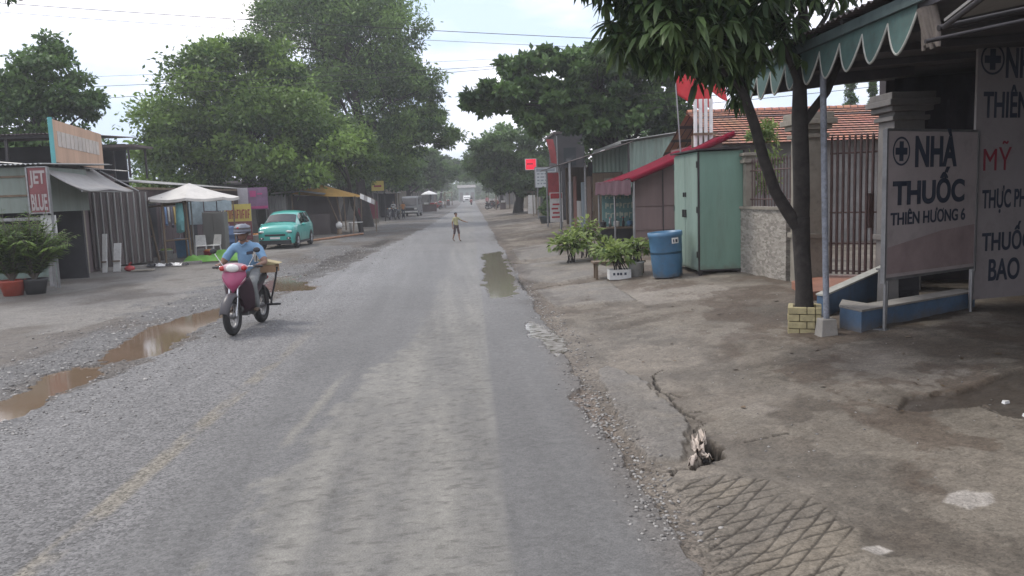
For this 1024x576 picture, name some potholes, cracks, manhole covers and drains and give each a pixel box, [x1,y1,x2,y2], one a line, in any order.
pothole [0,364,107,422]
pothole [688,439,729,471]
pothole [476,251,521,299]
crack [650,369,707,441]
pothole [523,320,568,357]
pothole [92,305,231,365]
